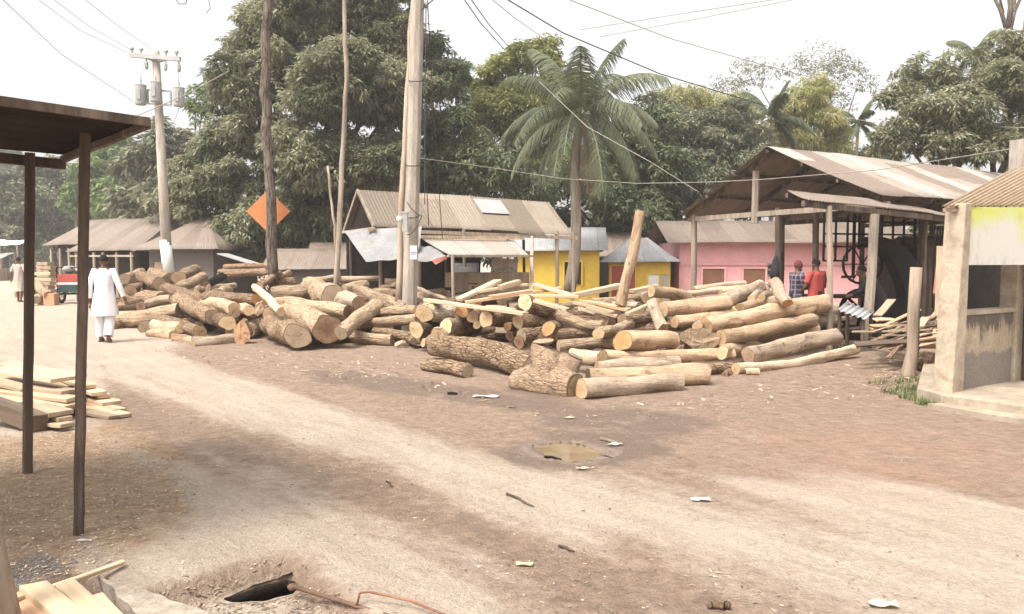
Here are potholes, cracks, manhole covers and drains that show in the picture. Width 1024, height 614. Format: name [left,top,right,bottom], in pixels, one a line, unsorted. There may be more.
pothole [212,566,306,606]
pothole [520,439,622,466]
